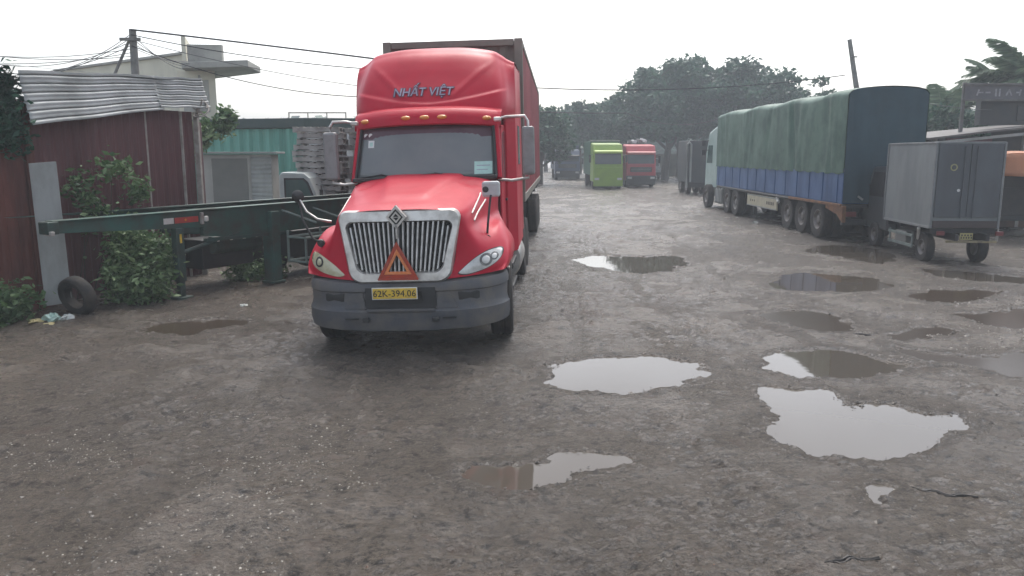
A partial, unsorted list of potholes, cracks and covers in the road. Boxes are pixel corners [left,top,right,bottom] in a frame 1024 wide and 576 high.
pothole [528,352,724,398]
pothole [876,324,970,342]
pothole [890,287,1019,305]
pothole [740,344,927,383]
pothole [744,382,986,468]
pothole [747,307,863,334]
pothole [756,271,905,293]
pothole [564,254,694,275]
pothole [945,305,1024,330]
pothole [132,317,262,338]
pothole [425,444,651,500]
